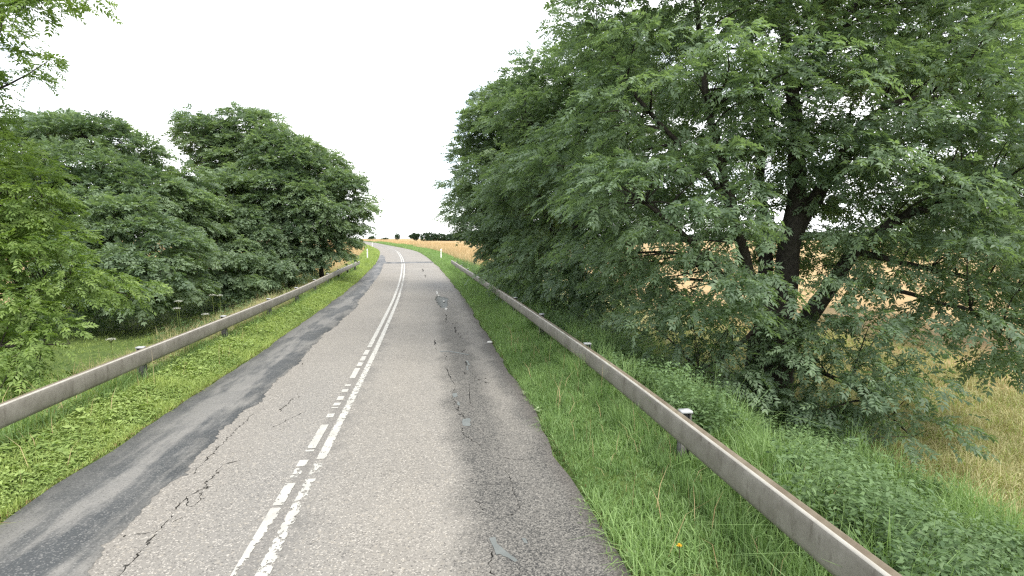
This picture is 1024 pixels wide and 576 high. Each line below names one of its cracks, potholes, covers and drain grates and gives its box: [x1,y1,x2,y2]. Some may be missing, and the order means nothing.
crack [434,314,487,445]
crack [119,414,253,576]
